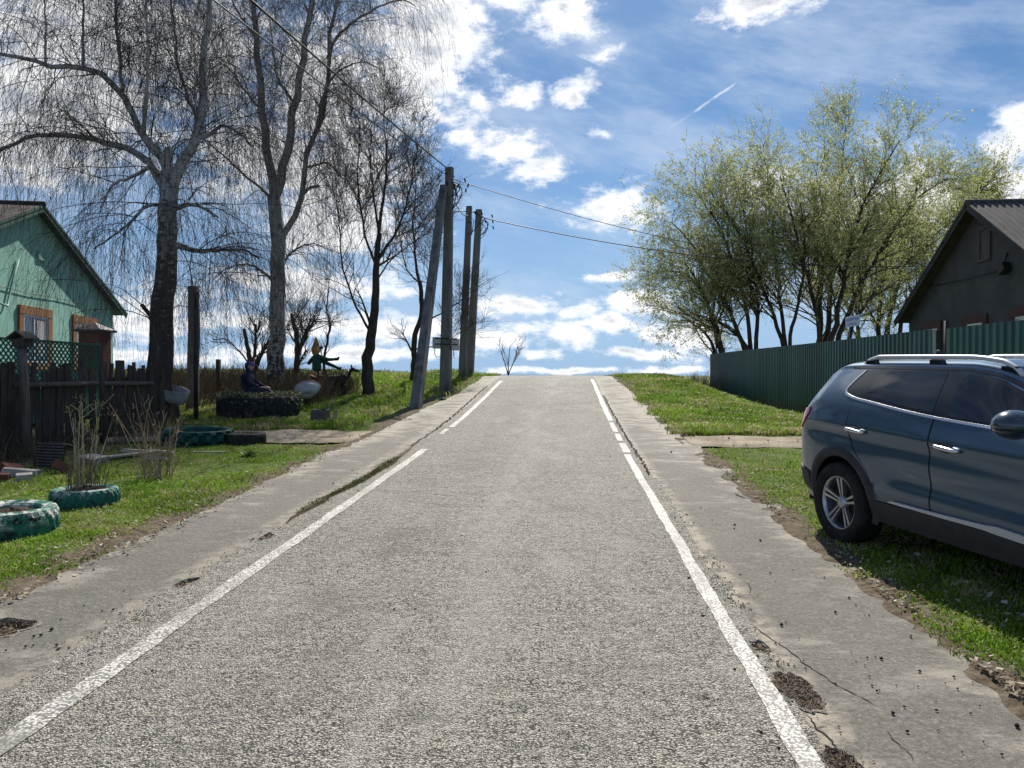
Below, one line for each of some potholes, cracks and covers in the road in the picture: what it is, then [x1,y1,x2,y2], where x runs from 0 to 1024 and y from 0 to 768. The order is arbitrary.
pothole [173,577,201,589]
pothole [751,639,771,653]
crack [807,715,854,765]
pothole [0,617,43,638]
pothole [770,670,828,714]
crack [756,627,871,703]
pothole [817,744,865,768]
